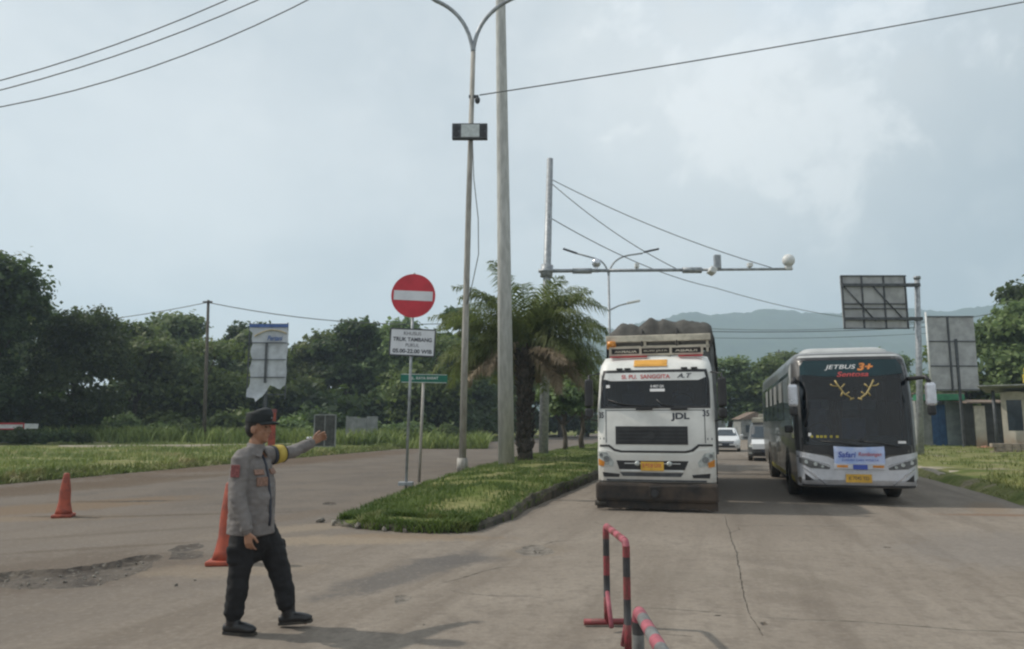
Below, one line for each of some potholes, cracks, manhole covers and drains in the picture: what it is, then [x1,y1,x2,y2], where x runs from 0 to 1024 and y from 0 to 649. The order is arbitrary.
pothole [515,545,555,556]
pothole [0,554,164,589]
pothole [168,543,205,560]
crack [656,519,1024,636]
